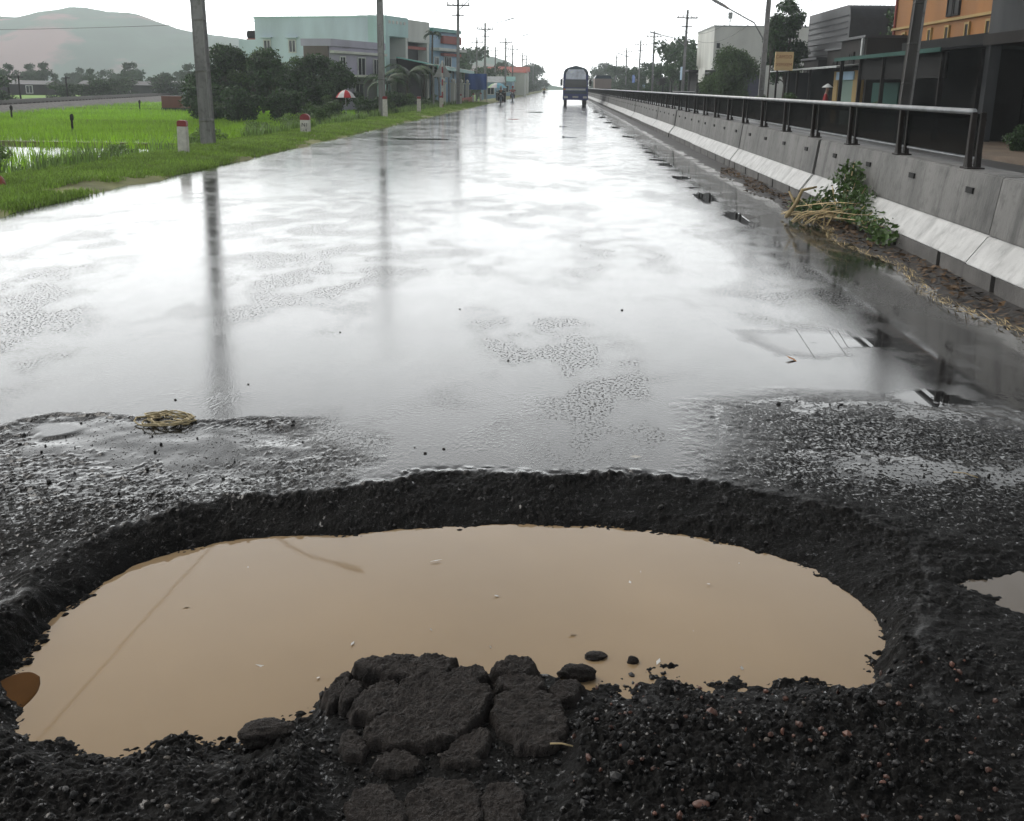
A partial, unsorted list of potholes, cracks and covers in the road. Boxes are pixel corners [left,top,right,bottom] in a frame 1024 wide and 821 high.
pothole [937,559,1024,626]
pothole [0,467,956,821]
